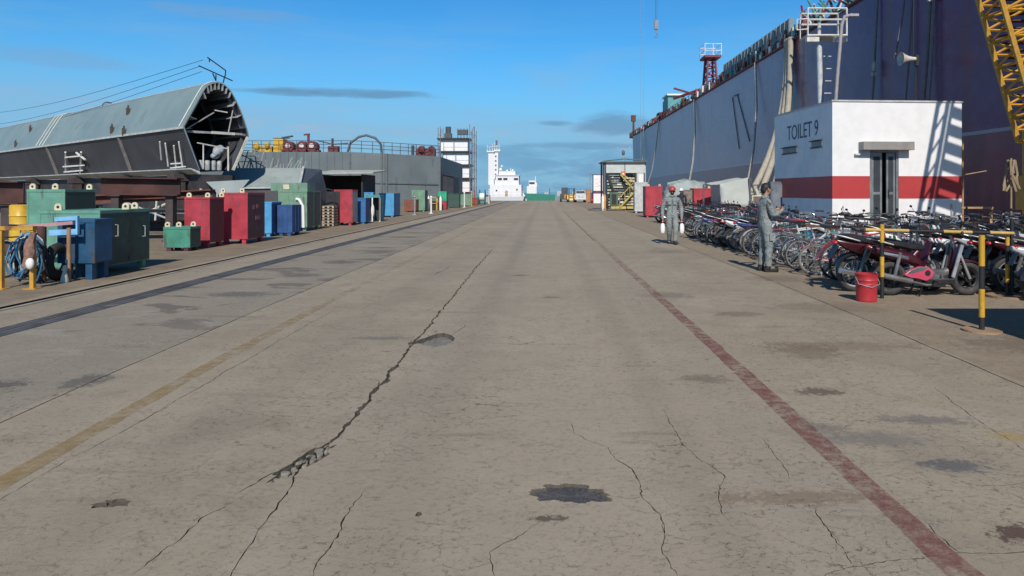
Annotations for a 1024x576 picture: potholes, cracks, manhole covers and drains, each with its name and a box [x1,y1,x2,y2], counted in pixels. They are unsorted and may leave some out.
pothole [90,499,132,508]
crack [664,411,729,521]
pothole [530,483,612,503]
crack [571,423,678,576]
crack [136,252,490,576]
pothole [408,333,455,347]
pothole [265,441,337,484]
